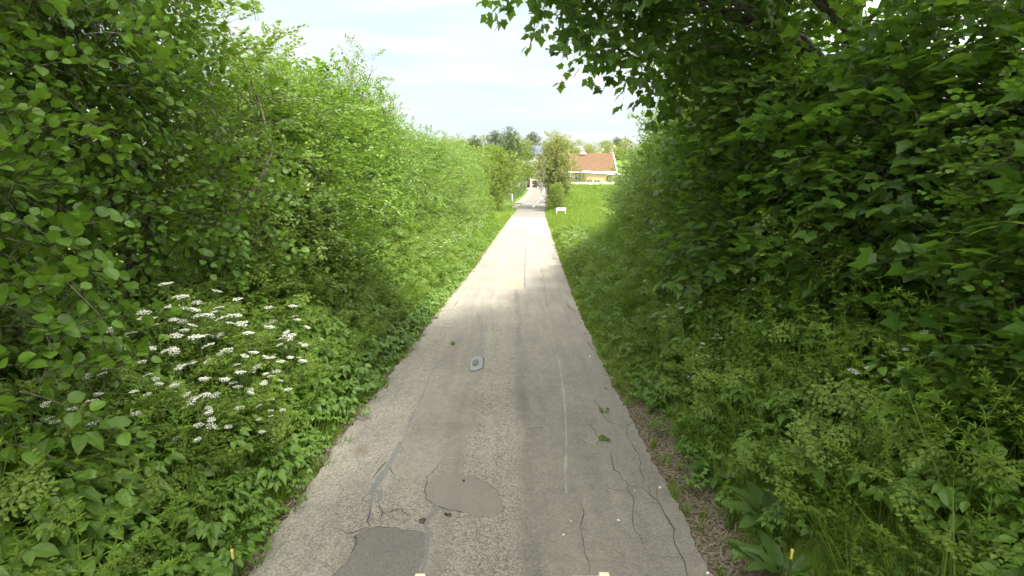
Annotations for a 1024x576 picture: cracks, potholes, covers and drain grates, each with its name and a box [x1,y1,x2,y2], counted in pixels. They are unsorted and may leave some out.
manhole cover [469,356,484,371]
crack [344,463,408,551]
crack [591,402,699,575]
crack [580,510,590,575]
